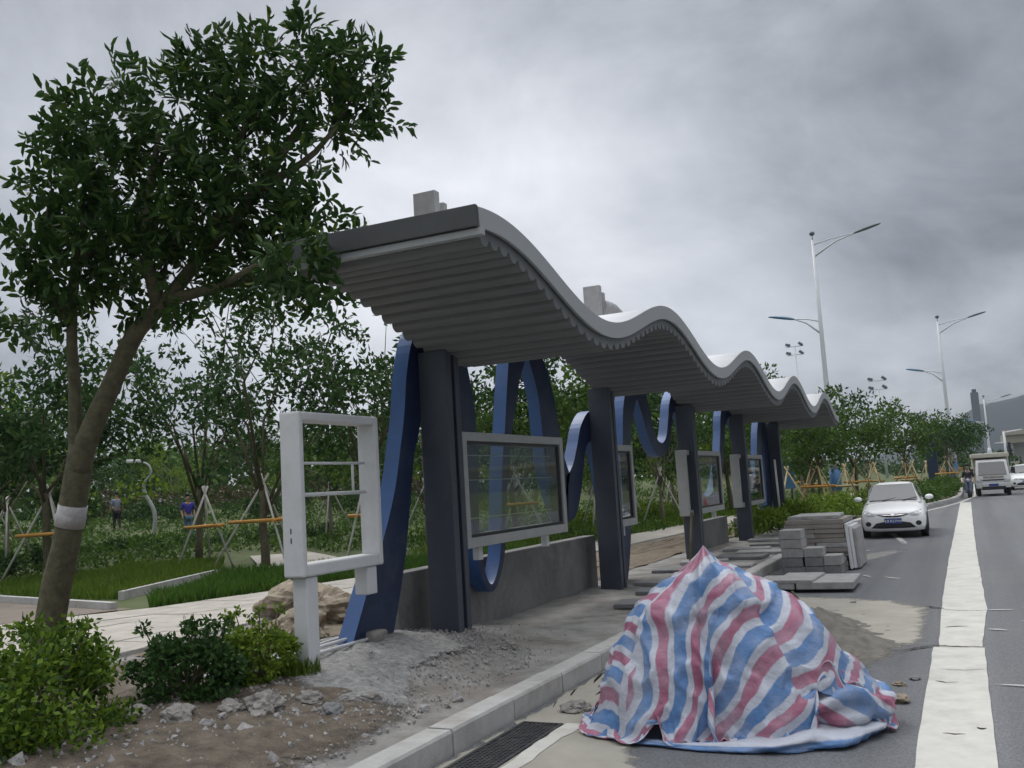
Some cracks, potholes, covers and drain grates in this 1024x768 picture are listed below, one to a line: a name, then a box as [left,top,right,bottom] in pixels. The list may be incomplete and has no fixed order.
drain grate [444,721,563,768]
